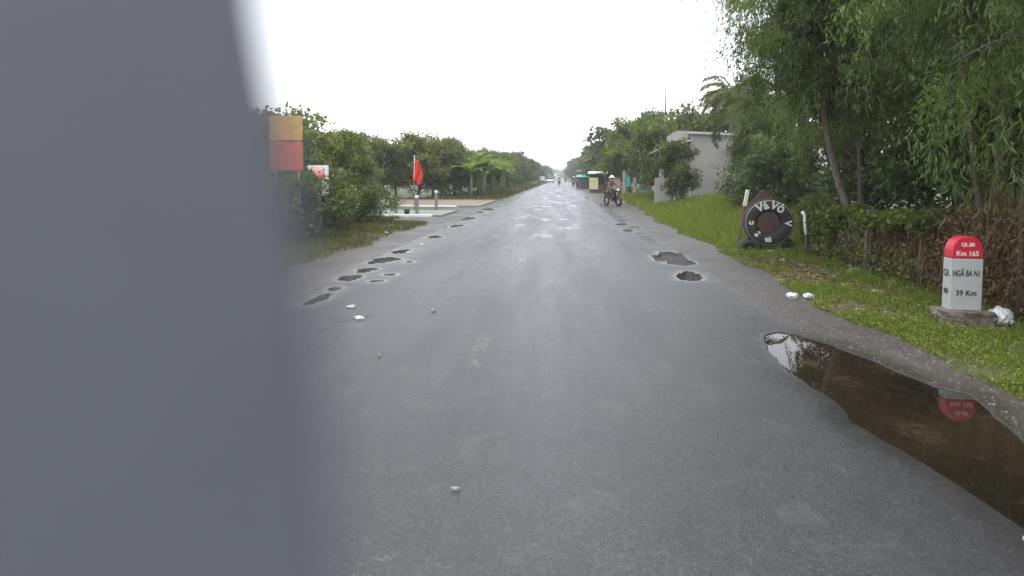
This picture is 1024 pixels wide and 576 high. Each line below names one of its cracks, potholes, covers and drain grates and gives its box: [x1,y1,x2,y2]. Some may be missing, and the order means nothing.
pothole [763,331,1024,529]
crack [317,313,376,331]
pothole [651,251,696,266]
pothole [676,271,703,281]
